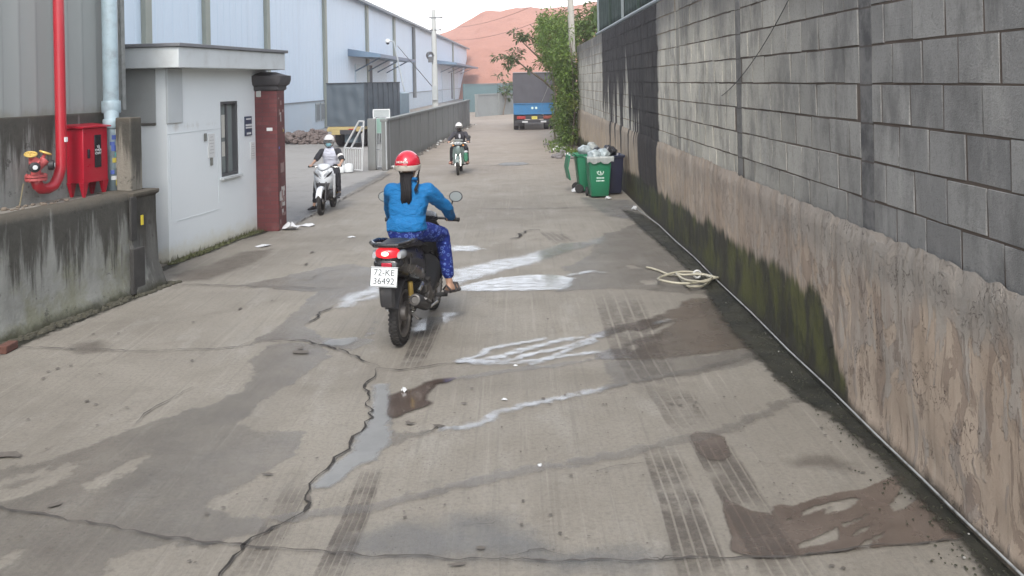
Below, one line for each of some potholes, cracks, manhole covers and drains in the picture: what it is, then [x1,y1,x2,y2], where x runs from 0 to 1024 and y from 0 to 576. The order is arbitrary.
crack [218,306,444,576]
